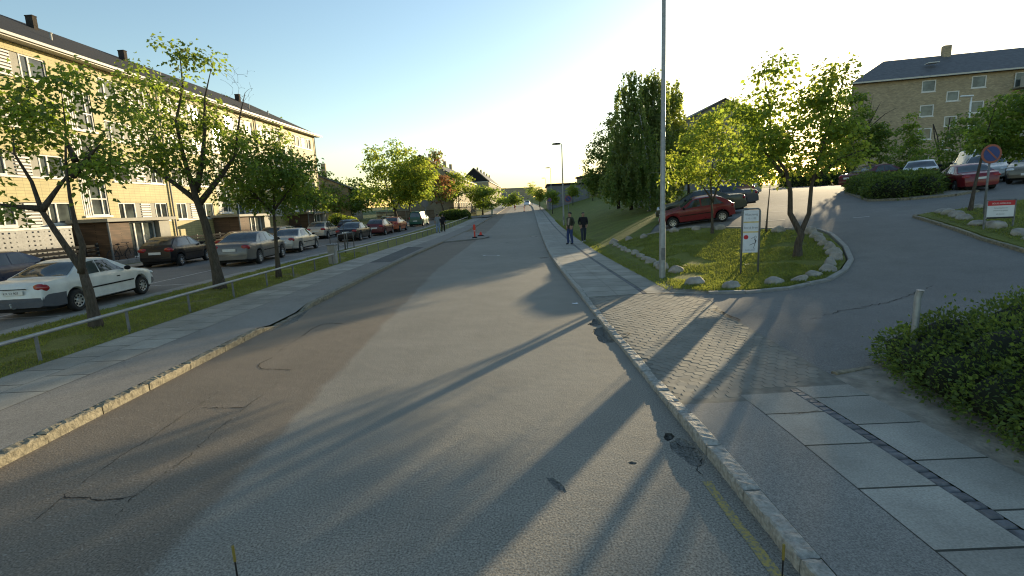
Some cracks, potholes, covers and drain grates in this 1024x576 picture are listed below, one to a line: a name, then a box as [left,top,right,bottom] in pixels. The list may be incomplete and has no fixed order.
crack [35,323,342,520]
pothole [592,327,615,343]
pothole [546,477,567,494]
pothole [664,433,705,475]
